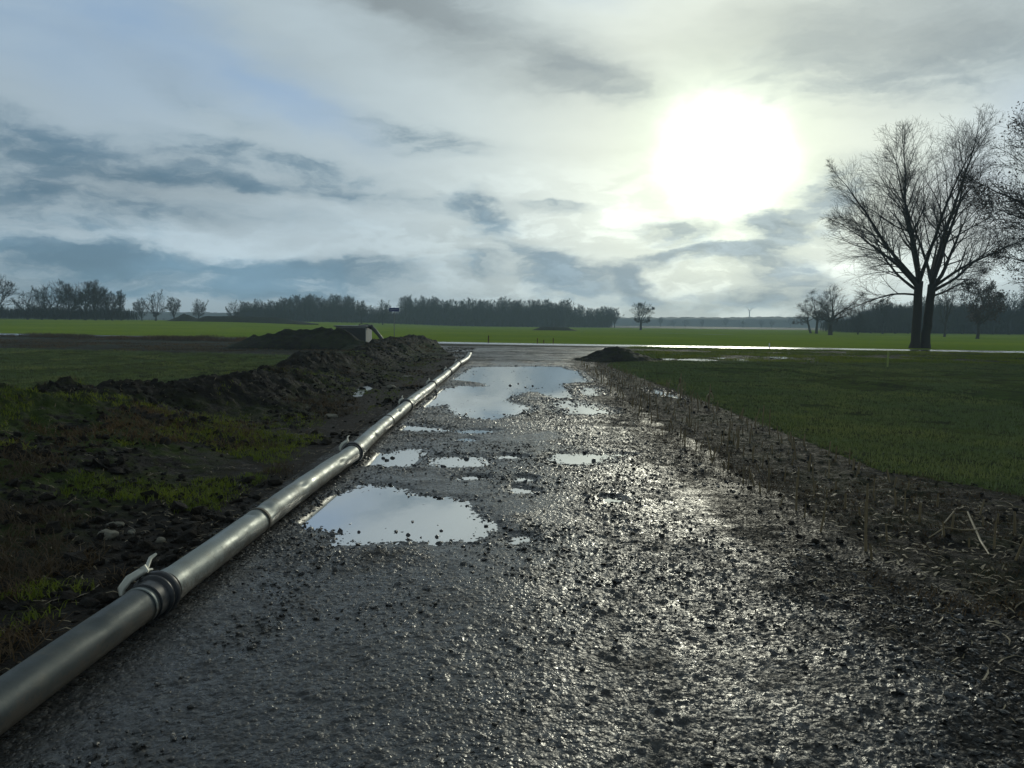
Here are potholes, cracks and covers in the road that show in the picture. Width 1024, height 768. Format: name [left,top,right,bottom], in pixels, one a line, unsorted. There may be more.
pothole [539,450,621,466]
pothole [501,484,545,495]
pothole [413,365,594,420]
pothole [416,452,501,468]
pothole [545,399,620,415]
pothole [278,481,509,548]
pothole [349,445,436,469]
pothole [447,472,495,480]
